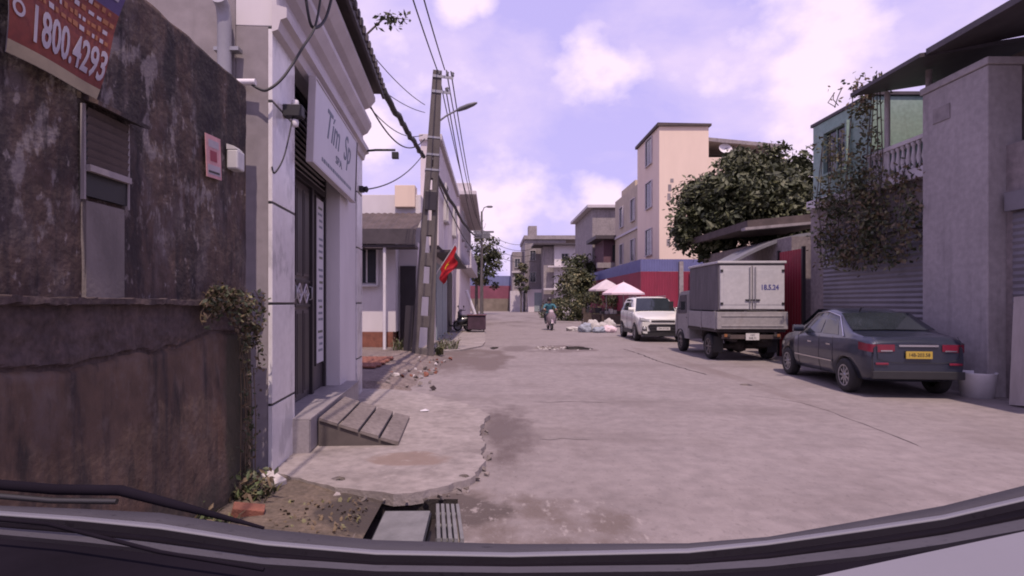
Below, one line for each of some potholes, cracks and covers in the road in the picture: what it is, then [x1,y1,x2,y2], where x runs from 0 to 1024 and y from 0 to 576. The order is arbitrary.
drain grate [435,503,464,543]
manhole cover [371,511,432,541]
